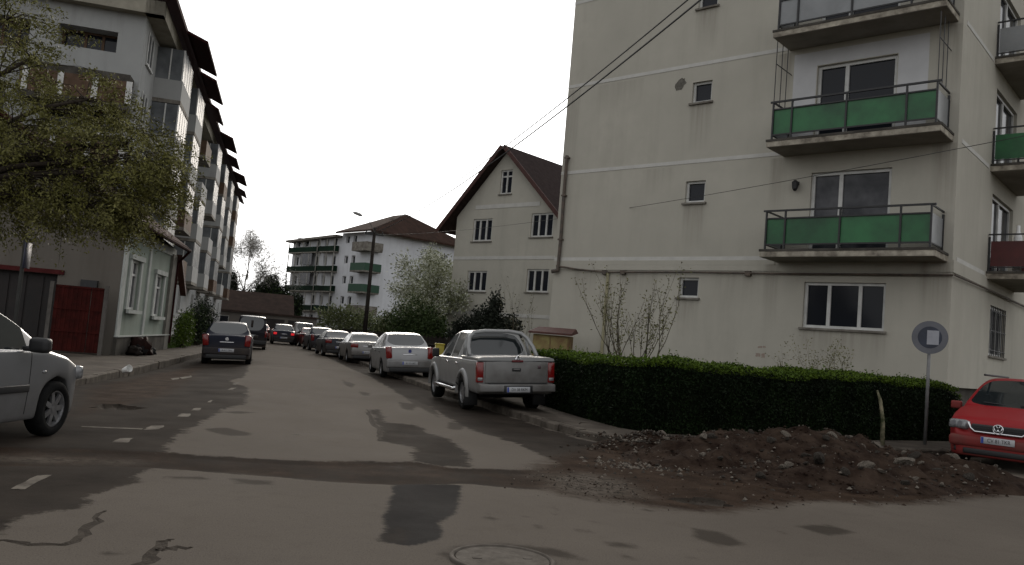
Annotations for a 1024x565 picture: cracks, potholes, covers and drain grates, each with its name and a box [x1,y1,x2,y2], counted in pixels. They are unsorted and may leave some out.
crack [0,511,105,546]
manhole cover [449,544,556,565]
crack [130,539,191,565]
